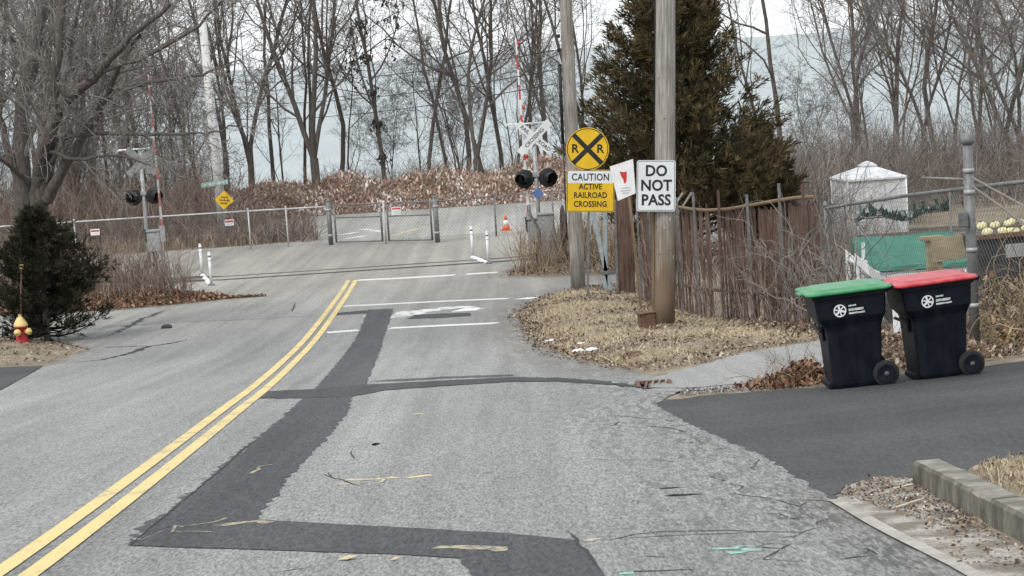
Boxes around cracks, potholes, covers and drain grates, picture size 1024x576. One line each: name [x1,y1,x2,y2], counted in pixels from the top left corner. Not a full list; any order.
crack [570,438,877,573]
crack [70,303,318,363]
